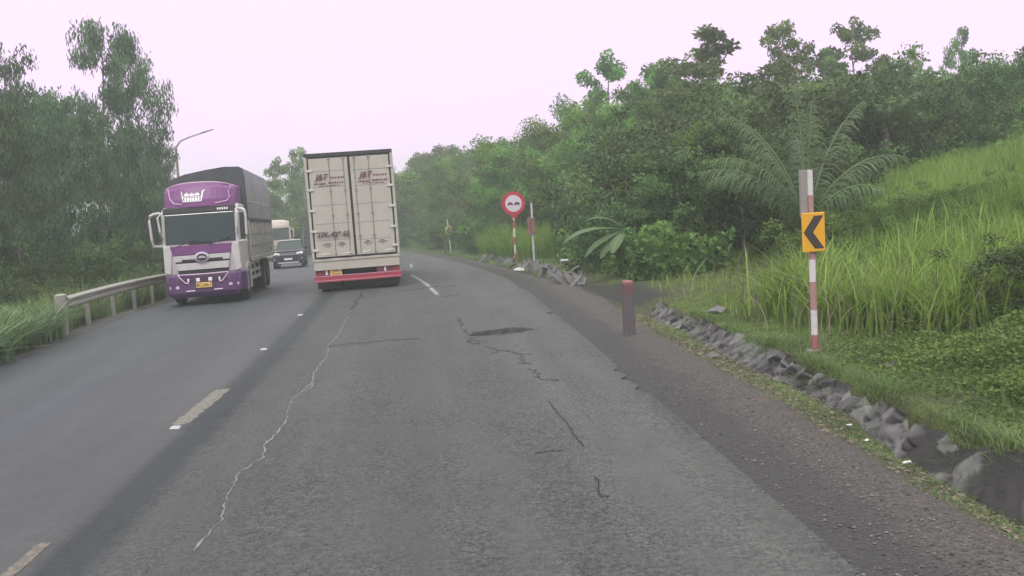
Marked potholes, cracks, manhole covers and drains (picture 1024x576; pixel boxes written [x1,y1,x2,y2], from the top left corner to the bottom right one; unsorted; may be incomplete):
crack [193,292,420,550]
crack [457,318,559,381]
pothole [455,326,547,338]
crack [535,401,584,454]
crack [594,476,610,497]
